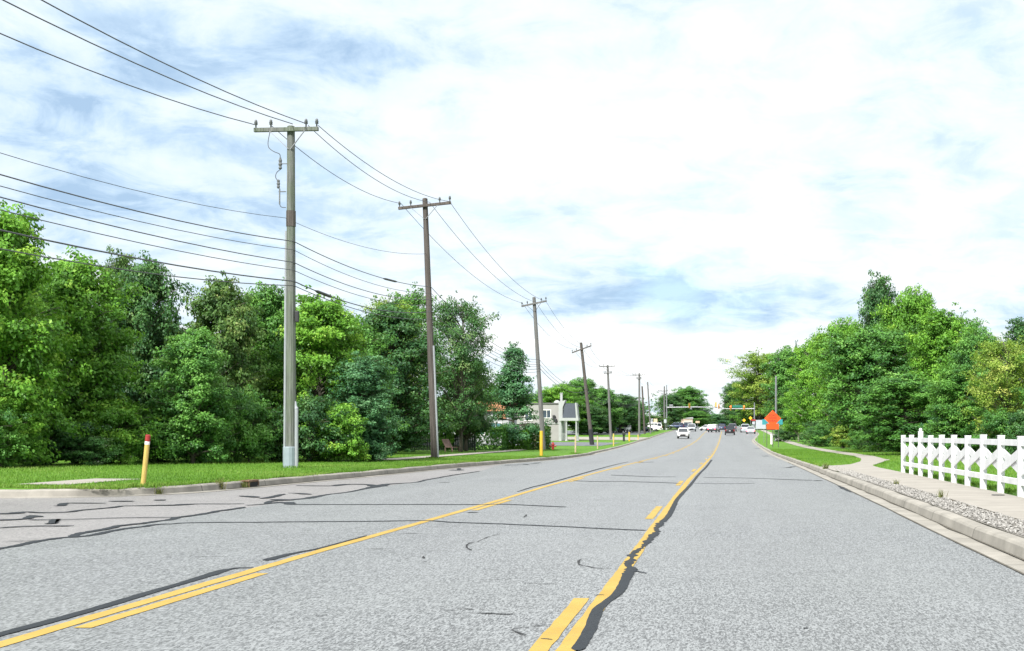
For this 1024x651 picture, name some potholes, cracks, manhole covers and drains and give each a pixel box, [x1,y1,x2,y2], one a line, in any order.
crack [0,484,386,541]
